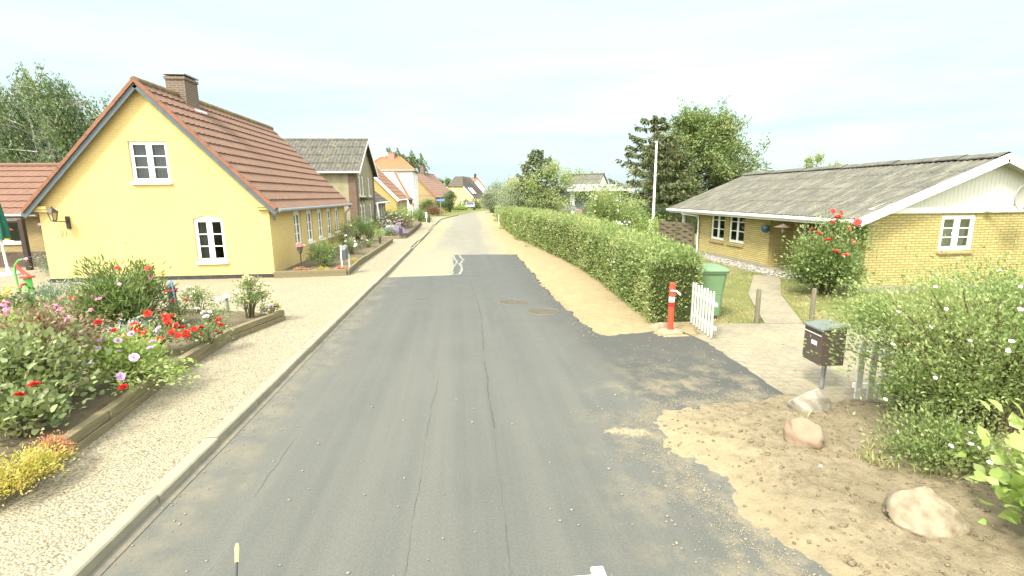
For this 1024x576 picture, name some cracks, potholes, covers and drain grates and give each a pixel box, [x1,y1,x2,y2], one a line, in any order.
manhole cover [527,307,560,315]
crack [405,382,438,573]
